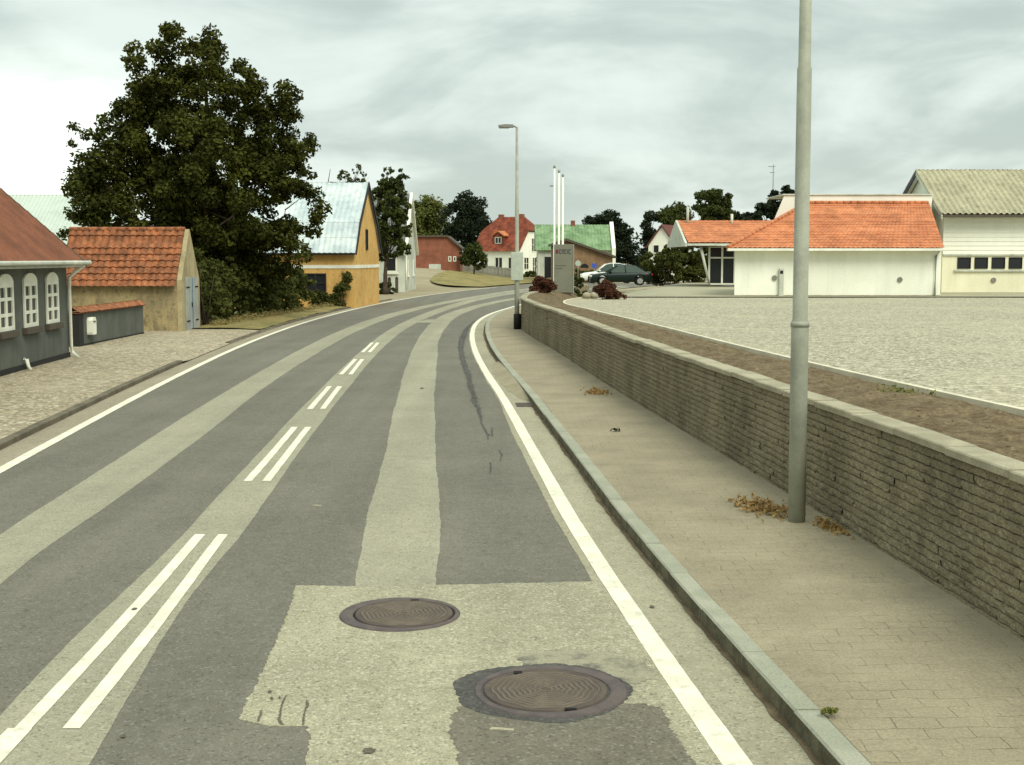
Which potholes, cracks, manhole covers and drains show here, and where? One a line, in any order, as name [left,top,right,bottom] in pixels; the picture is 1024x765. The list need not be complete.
manhole cover [339,597,460,632]
crack [257,695,310,725]
manhole cover [474,665,628,718]
